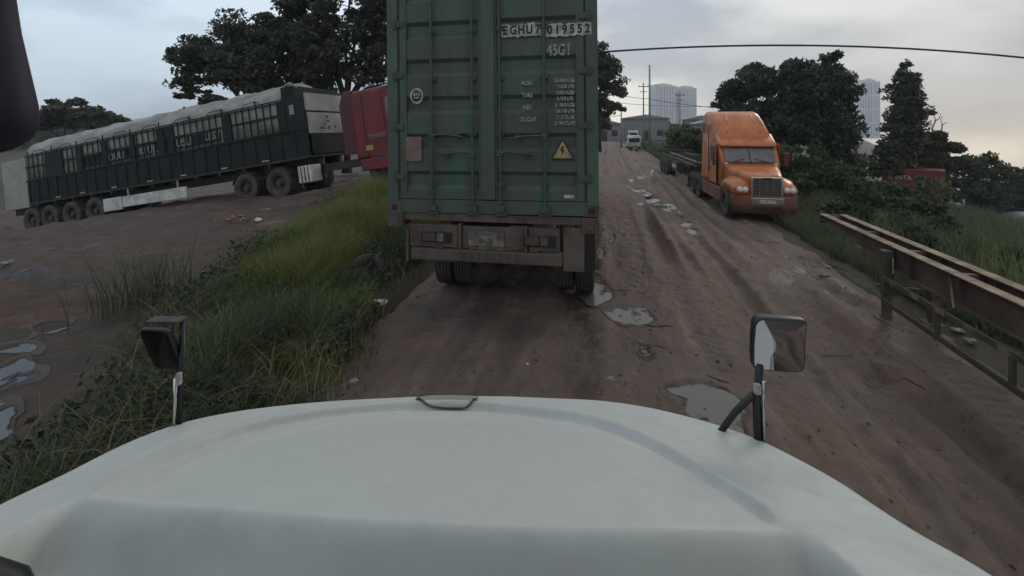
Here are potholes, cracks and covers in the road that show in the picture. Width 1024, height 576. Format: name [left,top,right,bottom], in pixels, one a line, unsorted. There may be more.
pothole [658,377,753,437]
pothole [601,302,662,327]
pothole [863,362,903,389]
pothole [623,183,653,200]
pothole [0,354,52,392]
pothole [678,218,697,228]
pothole [651,199,686,217]
pothole [0,339,48,356]
pothole [579,271,617,309]
pothole [637,344,658,360]
